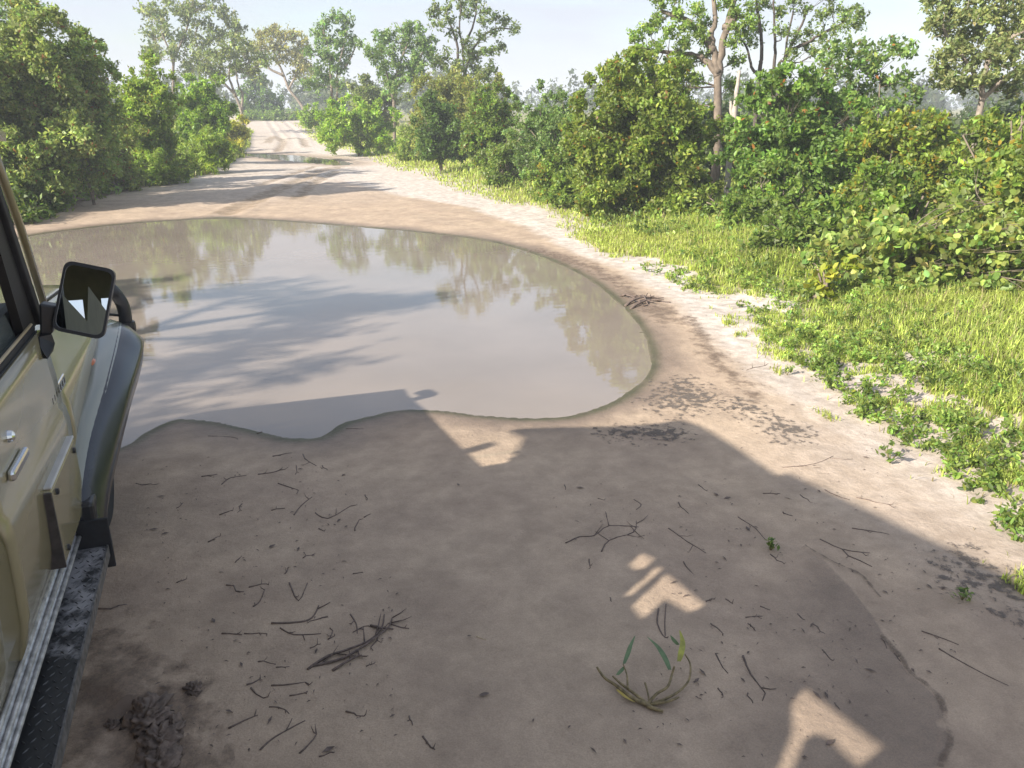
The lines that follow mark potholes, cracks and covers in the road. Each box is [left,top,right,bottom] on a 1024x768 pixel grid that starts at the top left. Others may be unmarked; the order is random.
pothole [18,219,652,448]
